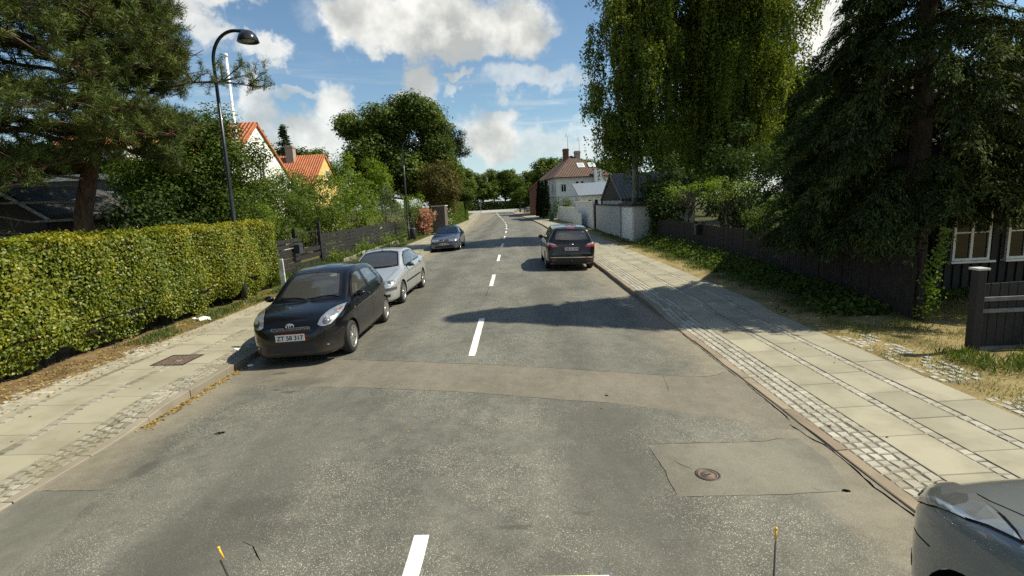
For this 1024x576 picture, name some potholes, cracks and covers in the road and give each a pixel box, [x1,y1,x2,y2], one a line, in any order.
utility cover [695,468,721,481]
manhole cover [150,354,204,366]
